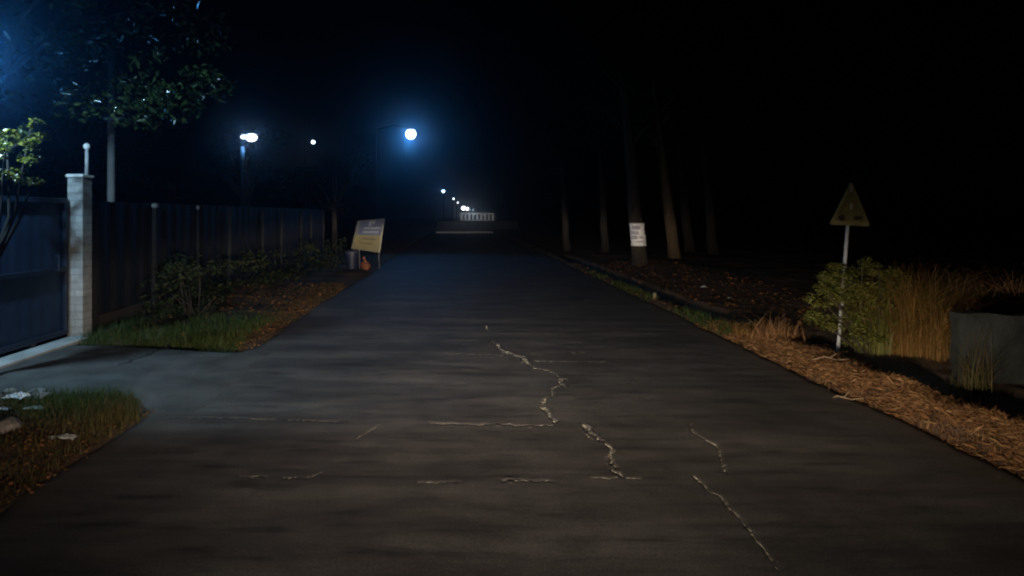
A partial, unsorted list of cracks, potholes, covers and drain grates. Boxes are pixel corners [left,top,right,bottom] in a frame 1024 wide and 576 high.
crack [170,325,580,427]
crack [417,425,641,484]
crack [690,423,779,570]
